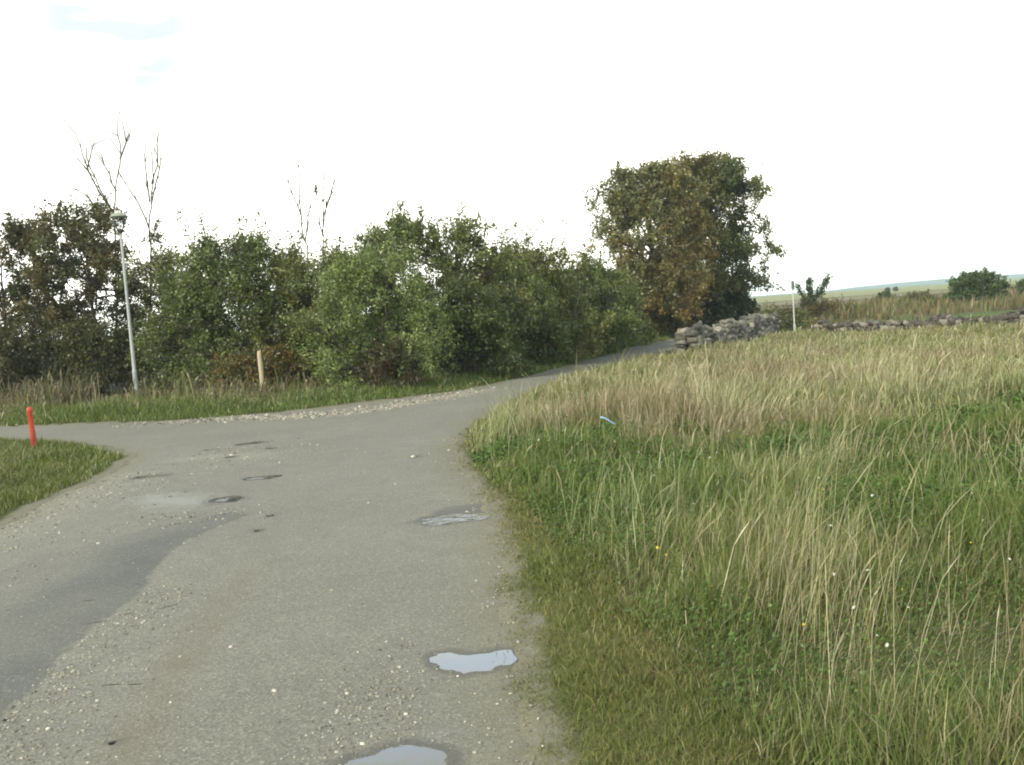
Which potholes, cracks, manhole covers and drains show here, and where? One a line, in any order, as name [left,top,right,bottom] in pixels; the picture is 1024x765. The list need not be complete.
pothole [417,513,491,525]
pothole [429,649,518,674]
pothole [343,745,448,765]
